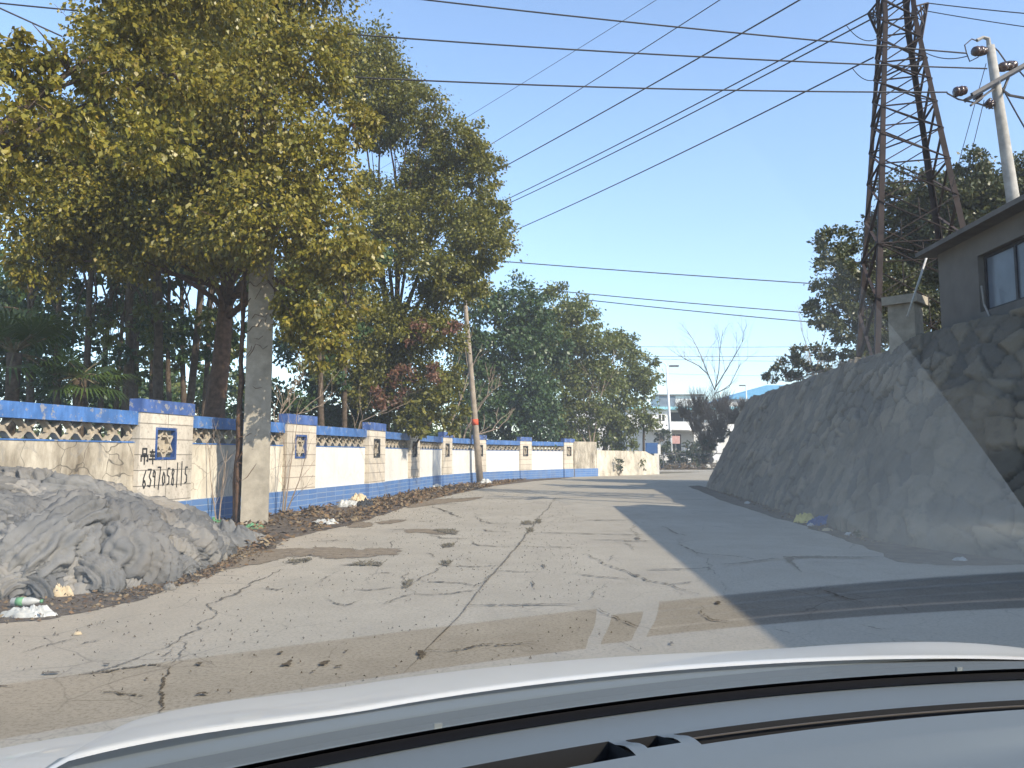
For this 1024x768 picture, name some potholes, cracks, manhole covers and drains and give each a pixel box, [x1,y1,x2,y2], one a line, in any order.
crack [329,507,559,605]
crack [87,569,282,713]
crack [428,641,533,651]
crack [575,525,752,651]
